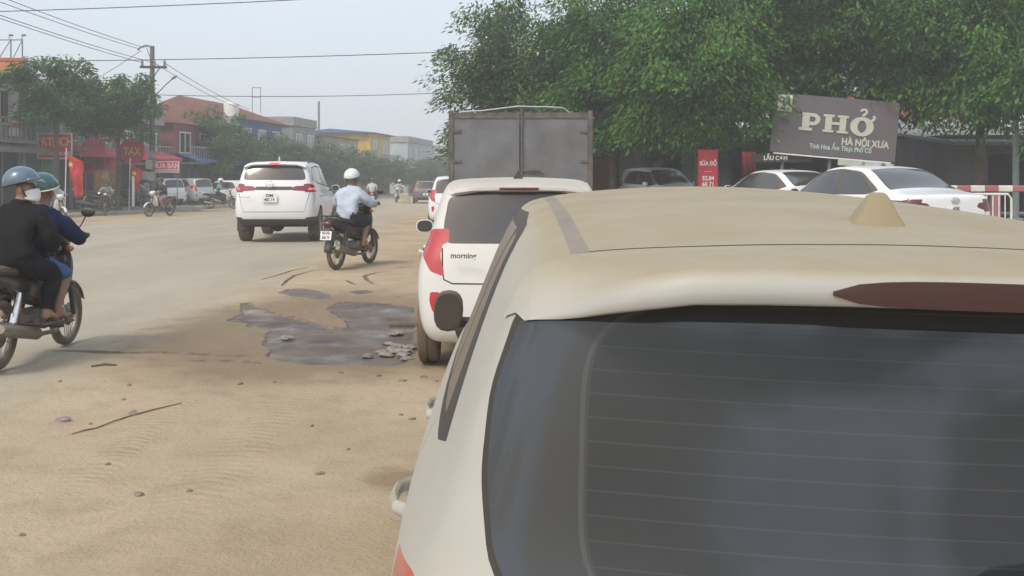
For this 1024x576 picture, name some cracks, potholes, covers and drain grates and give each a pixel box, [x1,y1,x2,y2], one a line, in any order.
pothole [226,301,418,367]
crack [261,267,314,286]
pothole [278,288,333,300]
crack [346,267,403,285]
